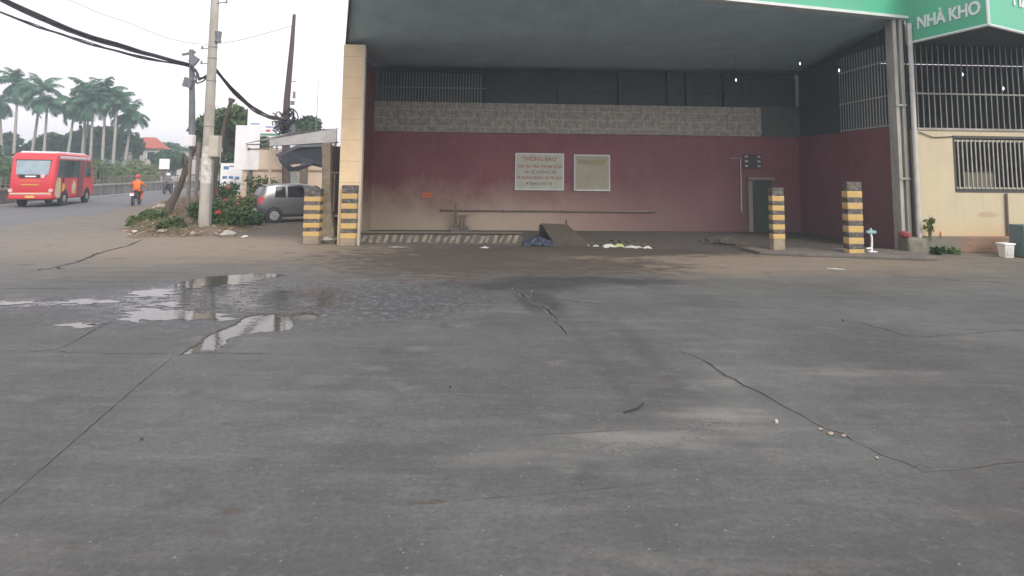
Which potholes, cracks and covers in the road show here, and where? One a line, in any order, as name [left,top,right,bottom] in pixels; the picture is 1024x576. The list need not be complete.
crack [664,348,1024,473]
crack [0,321,270,505]
crack [840,318,1024,337]
crack [512,288,608,334]
crack [25,239,143,273]
